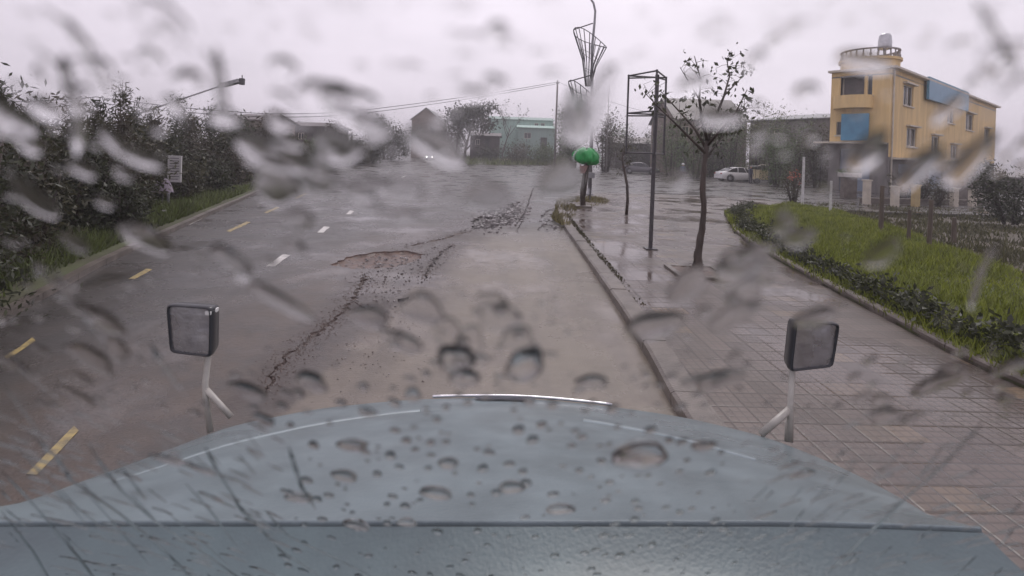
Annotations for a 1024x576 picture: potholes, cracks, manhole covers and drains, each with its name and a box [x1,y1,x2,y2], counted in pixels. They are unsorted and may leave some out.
crack [514,187,534,231]
pothole [470,203,521,230]
crack [265,274,374,392]
pothole [331,250,423,269]
